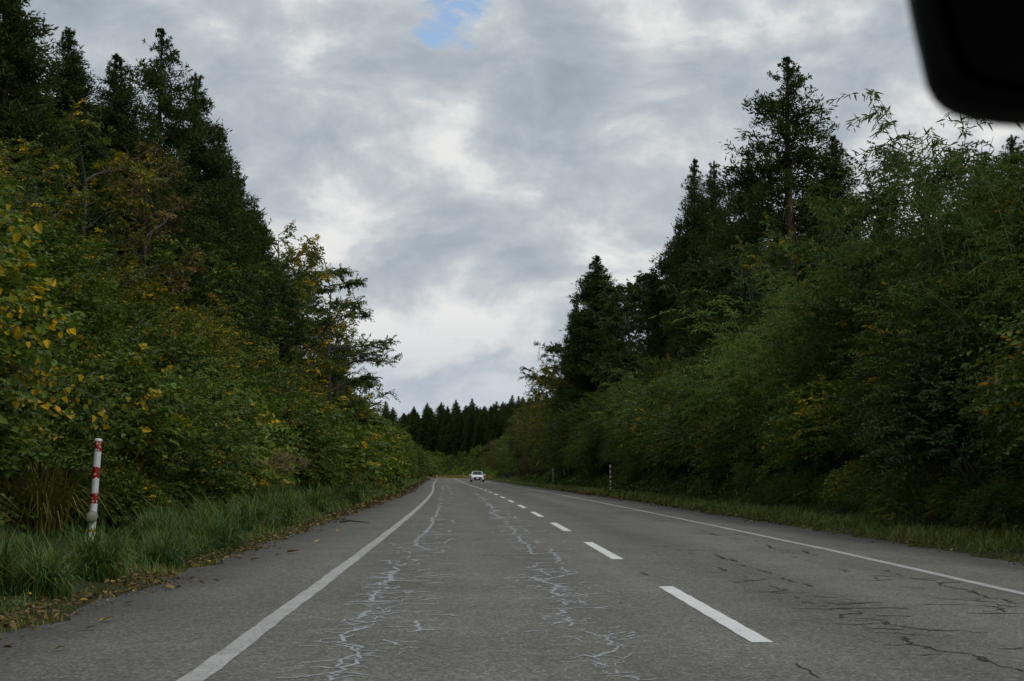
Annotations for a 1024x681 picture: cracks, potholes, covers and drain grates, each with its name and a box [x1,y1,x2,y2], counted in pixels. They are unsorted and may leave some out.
crack [469,490,658,681]
crack [665,546,1023,671]
crack [699,531,1020,614]
crack [276,484,460,681]
